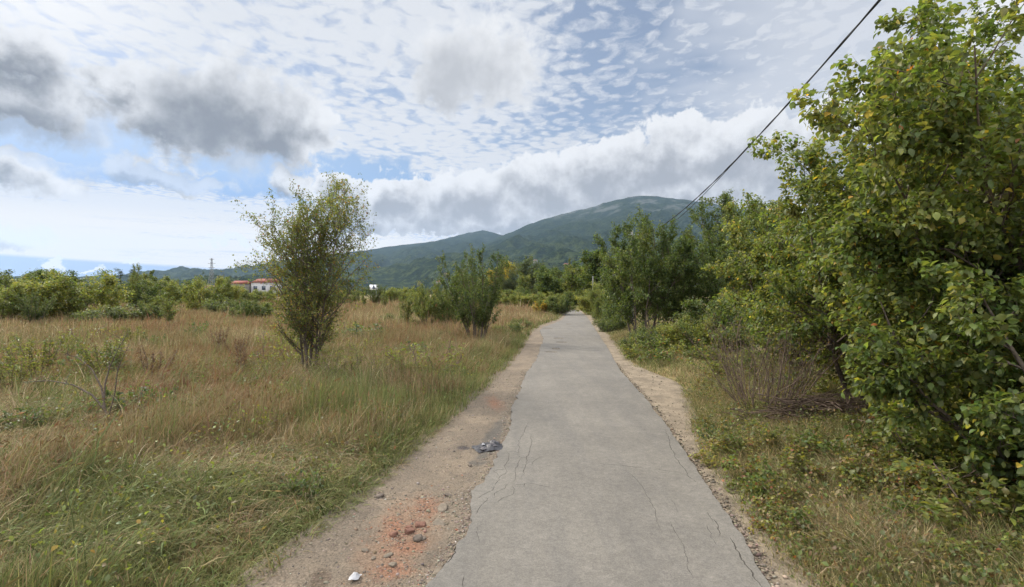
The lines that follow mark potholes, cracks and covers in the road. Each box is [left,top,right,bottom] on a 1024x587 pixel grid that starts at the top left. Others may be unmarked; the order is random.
crack [476,426,547,514]
crack [600,430,696,573]
crack [707,514,762,587]
